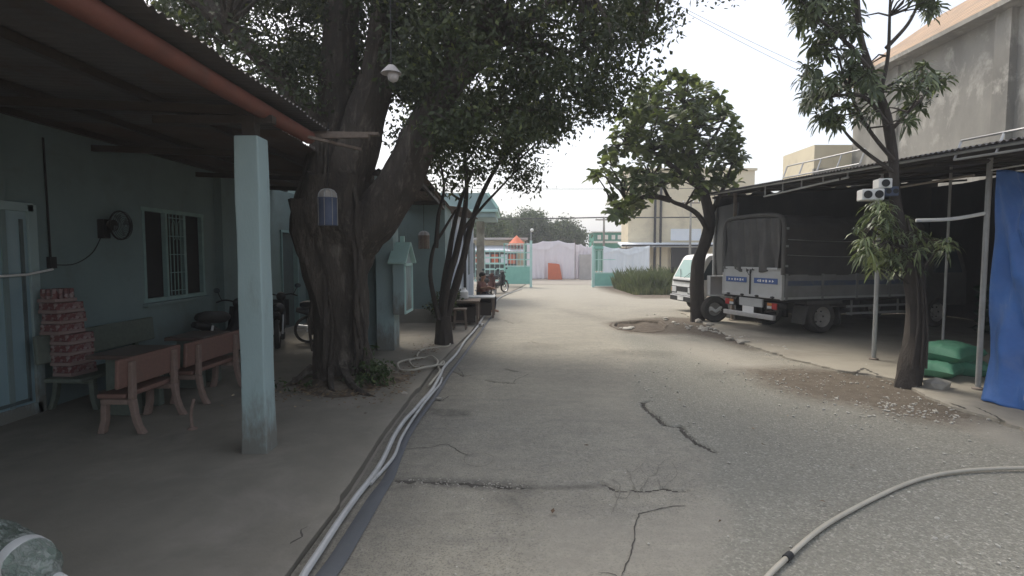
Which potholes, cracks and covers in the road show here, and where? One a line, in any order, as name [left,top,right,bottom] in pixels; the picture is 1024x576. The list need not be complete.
crack [395,444,528,494]
pothole [609,320,668,333]
crack [598,402,715,576]
